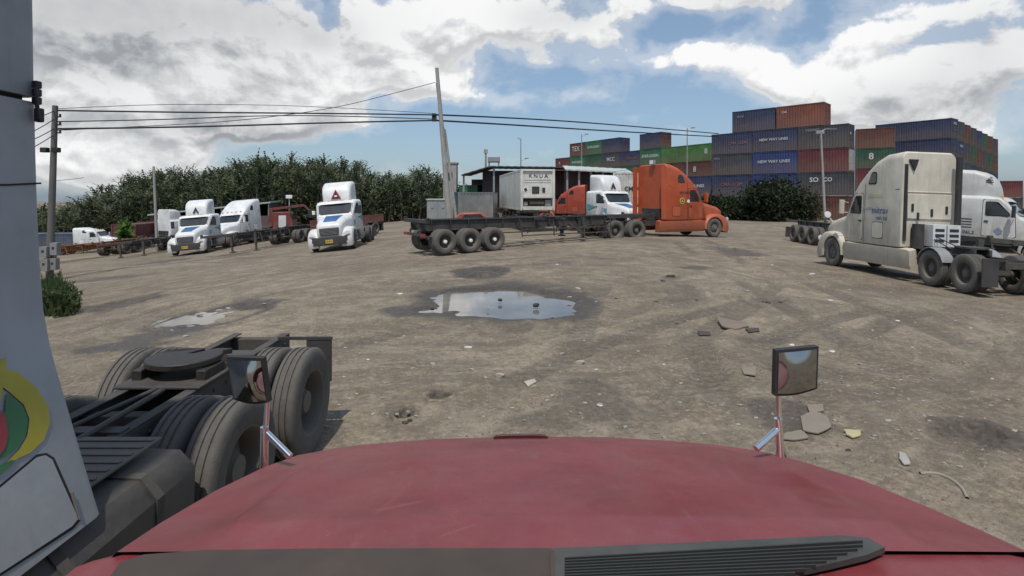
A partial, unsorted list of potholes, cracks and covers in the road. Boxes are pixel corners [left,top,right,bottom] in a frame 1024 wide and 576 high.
pothole [390,406,419,424]
pothole [143,297,299,341]
pothole [421,388,457,403]
pothole [364,280,634,337]
